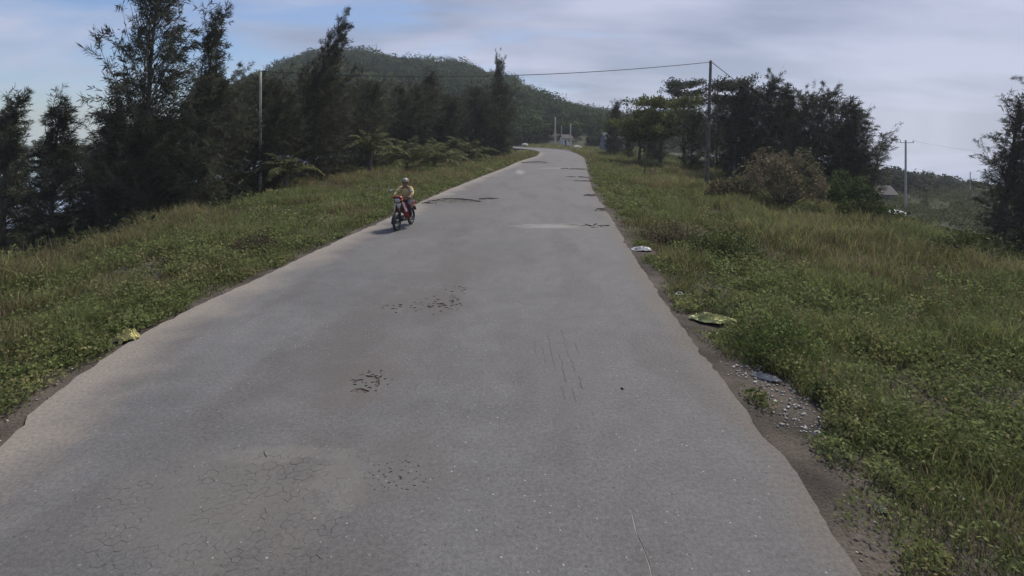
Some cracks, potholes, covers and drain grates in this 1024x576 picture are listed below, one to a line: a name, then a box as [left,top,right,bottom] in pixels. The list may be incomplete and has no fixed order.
pothole [387,286,466,315]
pothole [349,370,388,393]
